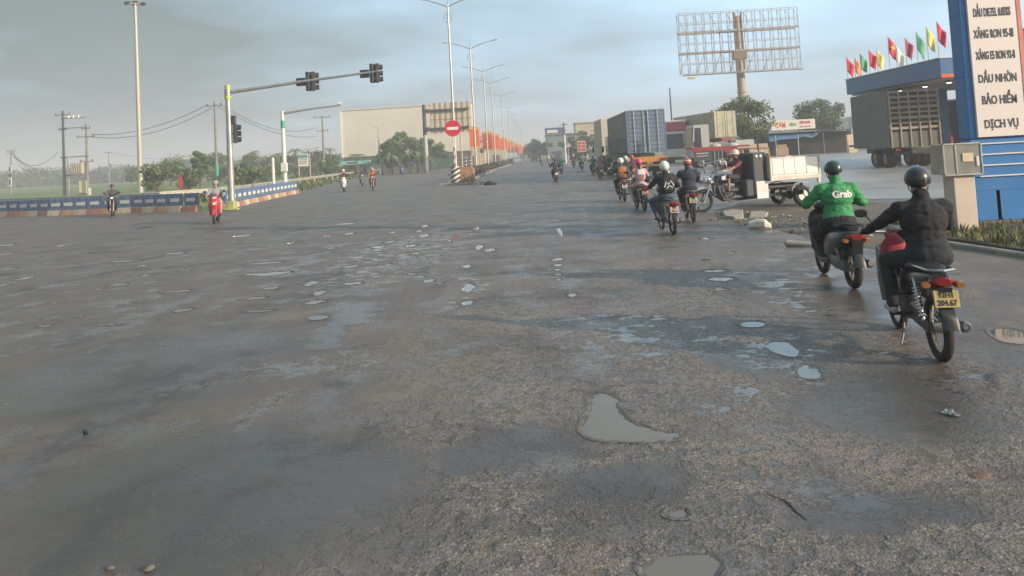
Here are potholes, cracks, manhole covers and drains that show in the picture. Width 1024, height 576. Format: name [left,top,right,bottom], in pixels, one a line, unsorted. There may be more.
pothole [984,326,1024,345]
pothole [576,391,692,443]
pothole [793,363,826,380]
pothole [660,505,695,521]
pothole [761,340,805,357]
pothole [735,320,769,328]
pothole [633,548,729,576]
pothole [457,282,480,293]
